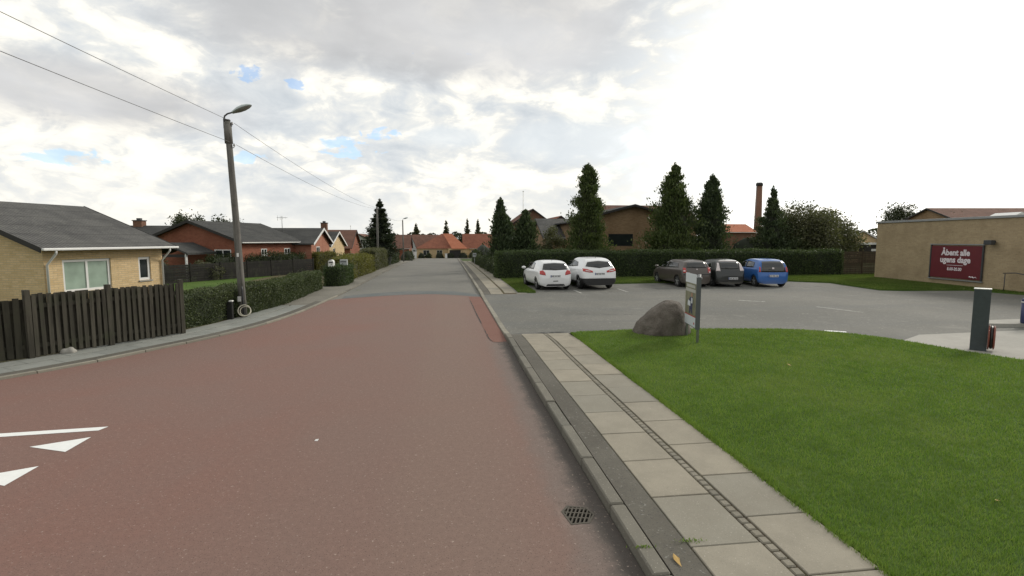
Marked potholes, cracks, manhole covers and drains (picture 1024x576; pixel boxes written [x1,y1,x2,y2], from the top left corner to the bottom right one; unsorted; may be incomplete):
drain grate [561,505,595,525]
